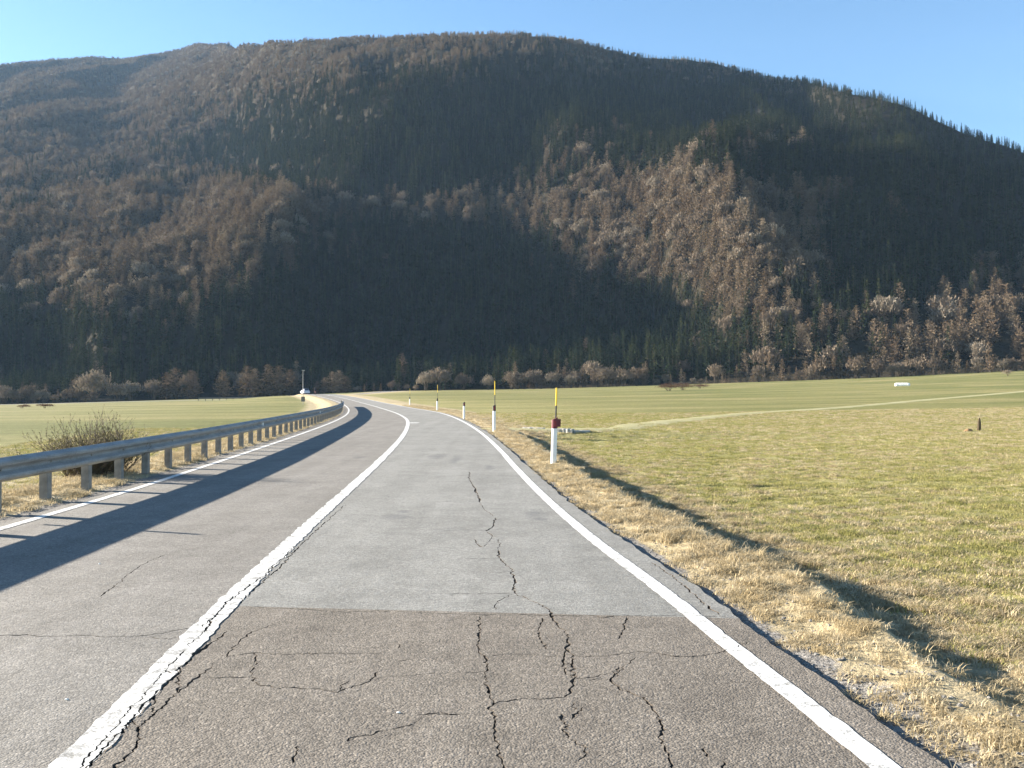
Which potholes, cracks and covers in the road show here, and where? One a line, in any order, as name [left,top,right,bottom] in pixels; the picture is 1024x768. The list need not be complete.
crack [0,472,747,768]
